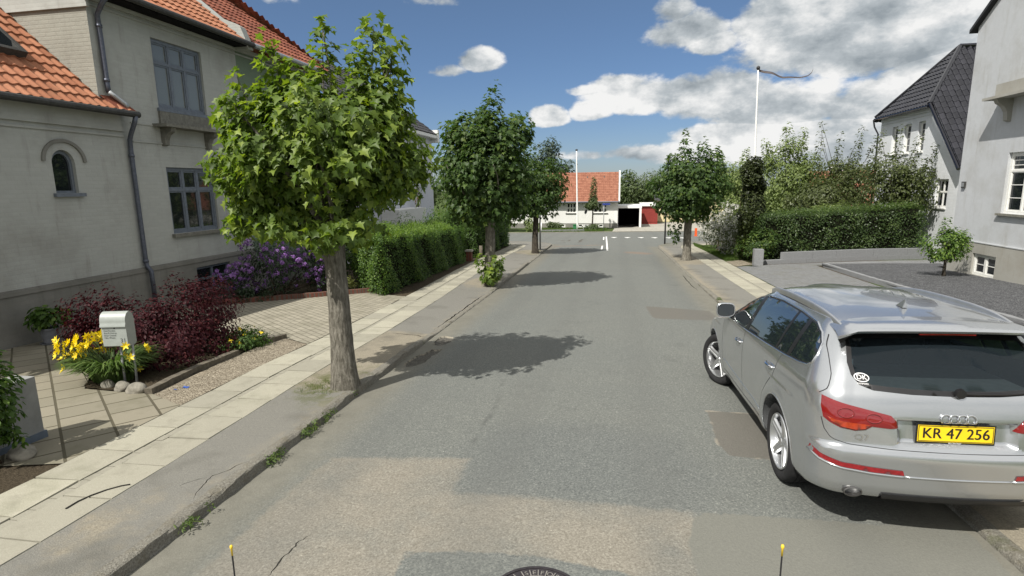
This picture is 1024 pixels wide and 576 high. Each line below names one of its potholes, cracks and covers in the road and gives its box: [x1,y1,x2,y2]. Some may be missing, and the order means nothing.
crack [270,536,308,575]
manhole cover [502,566,570,576]
